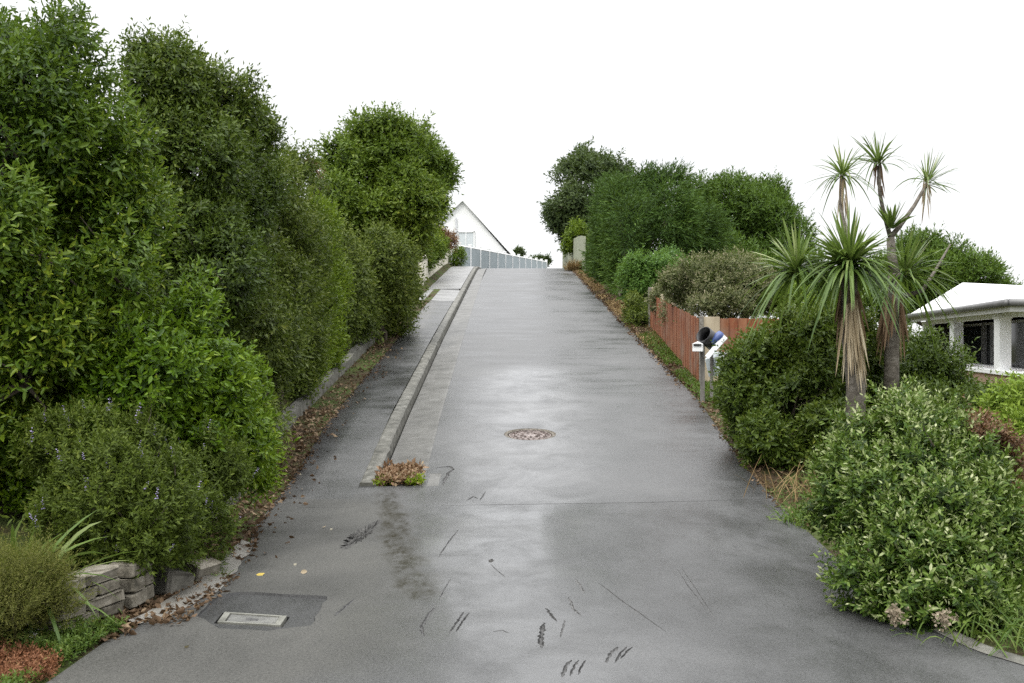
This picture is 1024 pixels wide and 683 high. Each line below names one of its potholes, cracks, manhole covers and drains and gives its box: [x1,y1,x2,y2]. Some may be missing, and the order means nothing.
manhole cover [217,612,287,627]
crack [419,579,470,636]
crack [537,579,666,677]
manhole cover [504,428,556,440]
